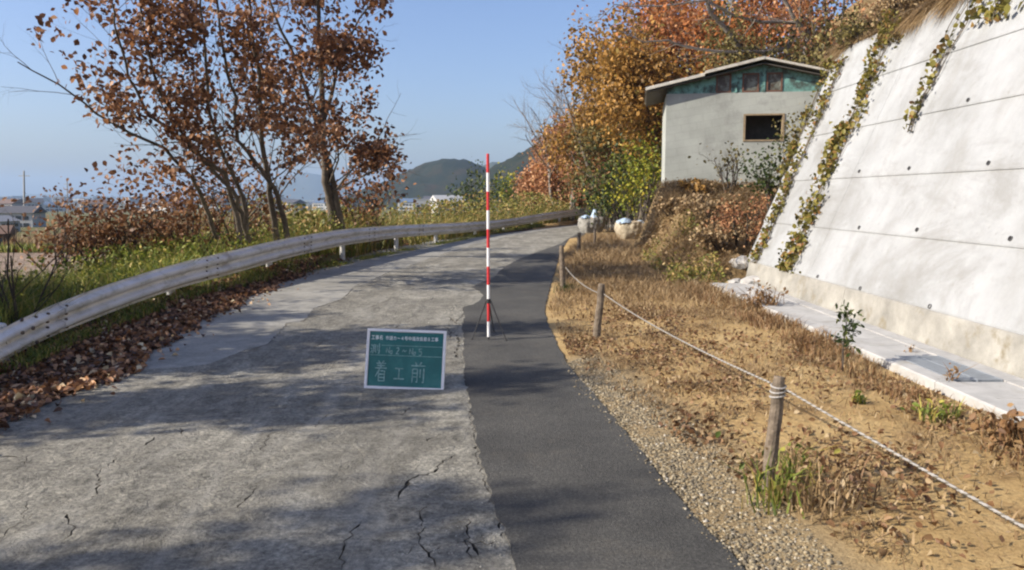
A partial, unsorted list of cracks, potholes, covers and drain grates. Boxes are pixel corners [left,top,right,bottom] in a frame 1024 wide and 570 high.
crack [89,457,117,499]
crack [339,522,361,566]
crack [395,455,503,566]
